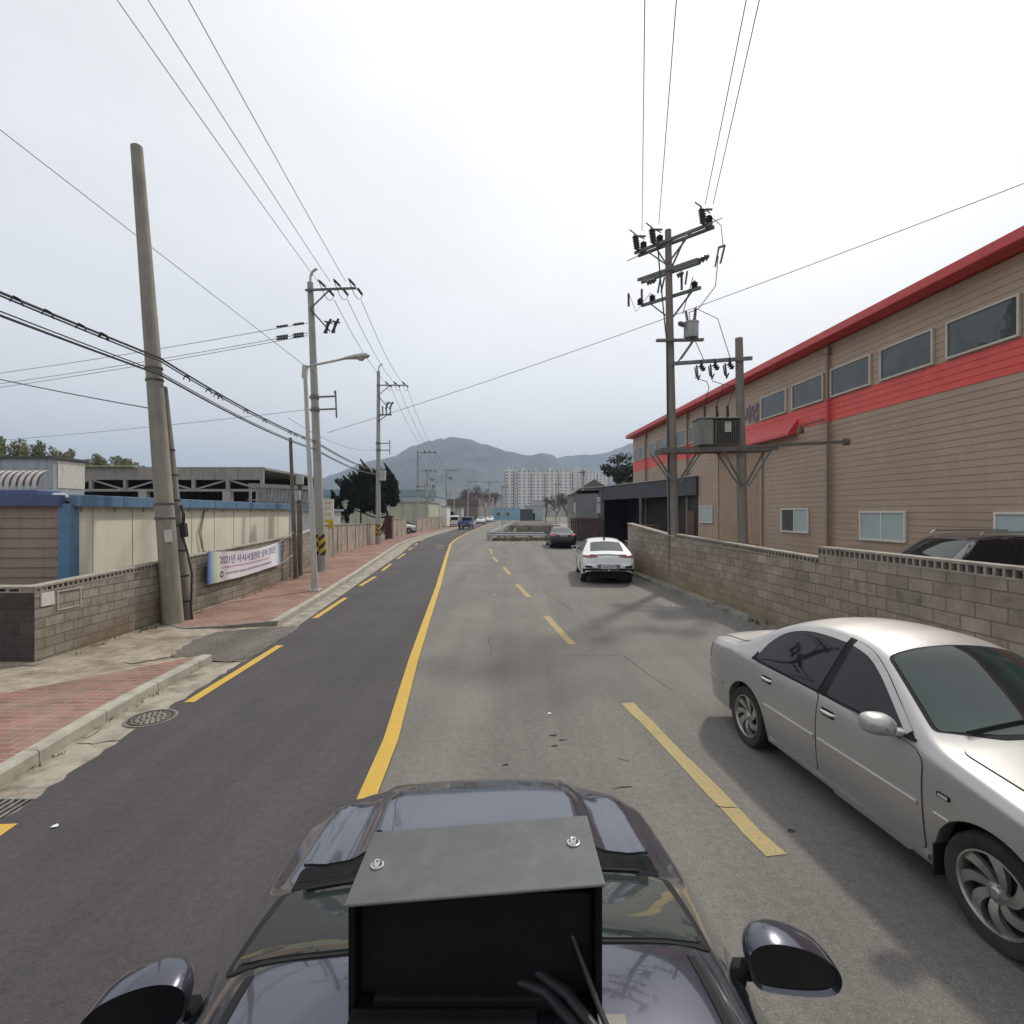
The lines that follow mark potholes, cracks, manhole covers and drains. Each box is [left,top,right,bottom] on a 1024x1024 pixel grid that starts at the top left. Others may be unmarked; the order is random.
drain grate [0,797,39,820]
manhole cover [123,709,178,728]
